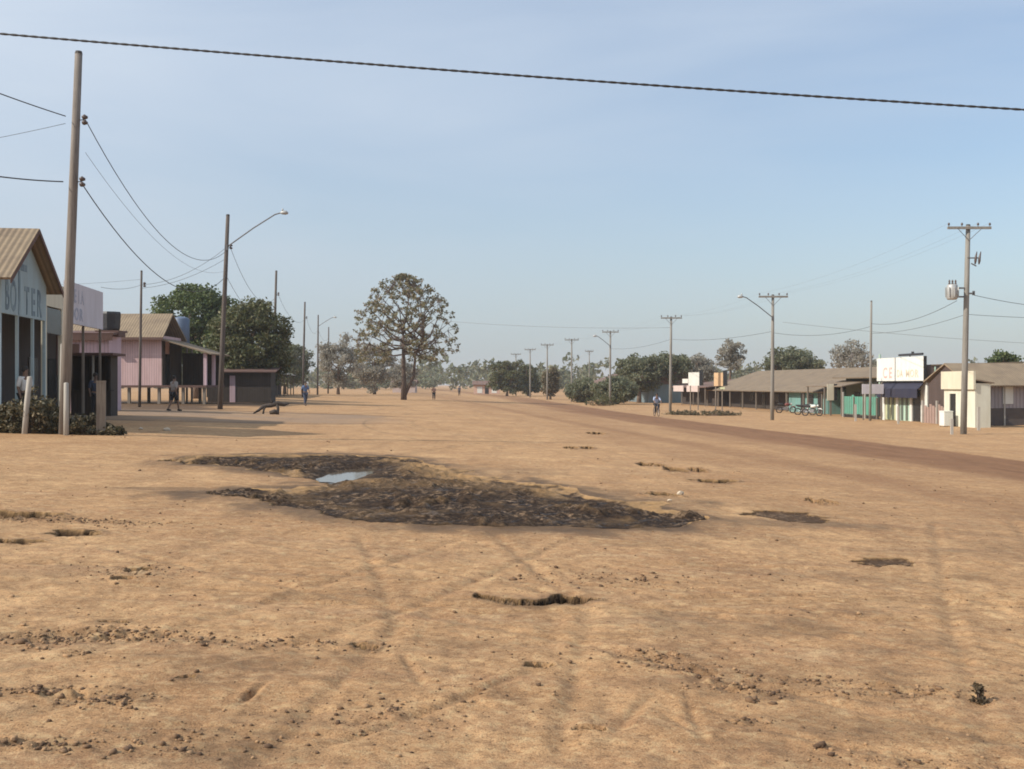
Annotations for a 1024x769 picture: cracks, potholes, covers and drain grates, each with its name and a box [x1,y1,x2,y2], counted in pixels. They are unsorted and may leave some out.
pothole [45,529,103,537]
pothole [740,510,829,523]
pothole [852,557,915,567]
pothole [175,454,710,529]
